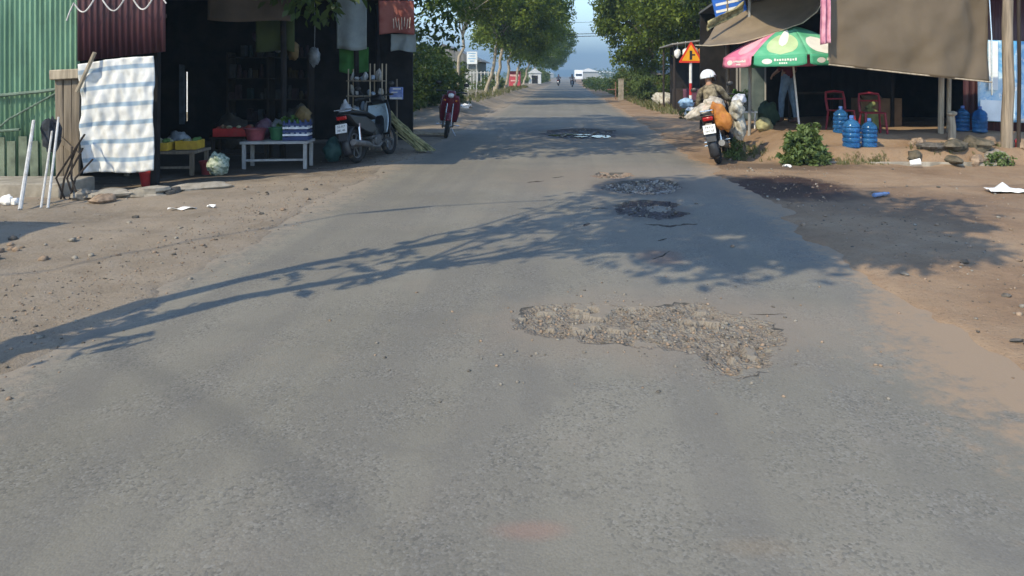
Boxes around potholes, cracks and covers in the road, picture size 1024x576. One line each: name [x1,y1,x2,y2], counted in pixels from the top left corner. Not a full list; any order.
pothole [539,128,617,139]
pothole [601,179,682,195]
crack [646,224,697,259]
pothole [510,302,788,379]
pothole [615,200,690,220]
